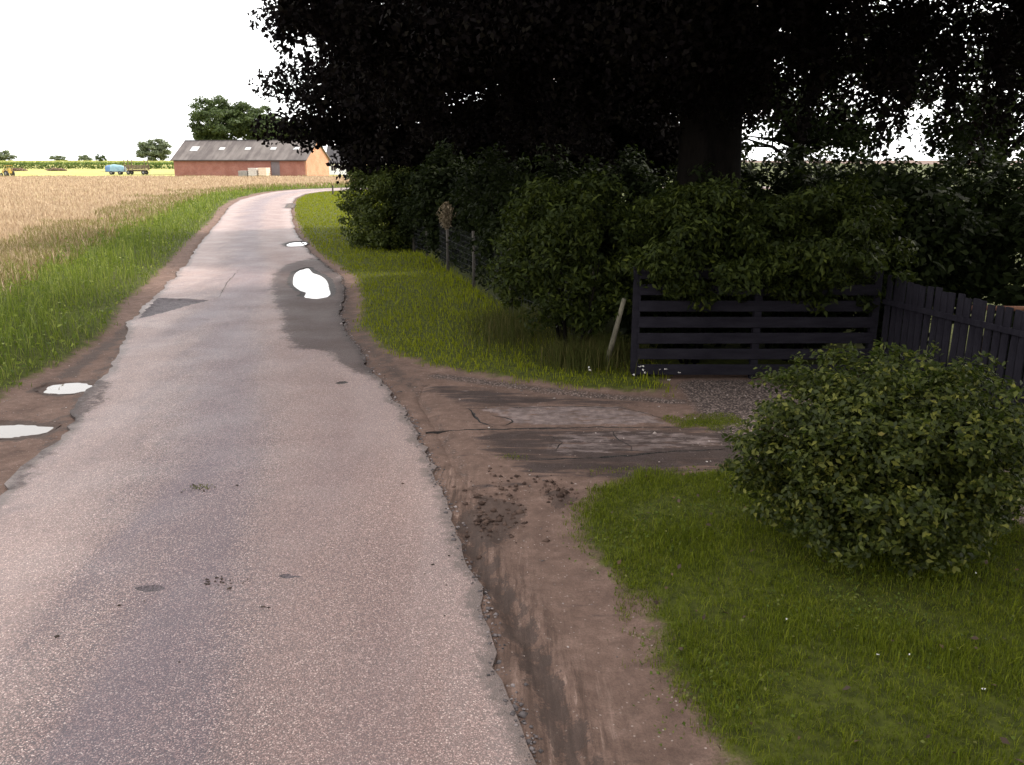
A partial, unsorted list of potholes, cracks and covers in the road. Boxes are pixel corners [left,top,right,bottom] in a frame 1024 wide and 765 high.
pothole [0,420,59,440]
pothole [286,267,337,298]
pothole [35,381,96,395]
crack [426,406,722,460]
